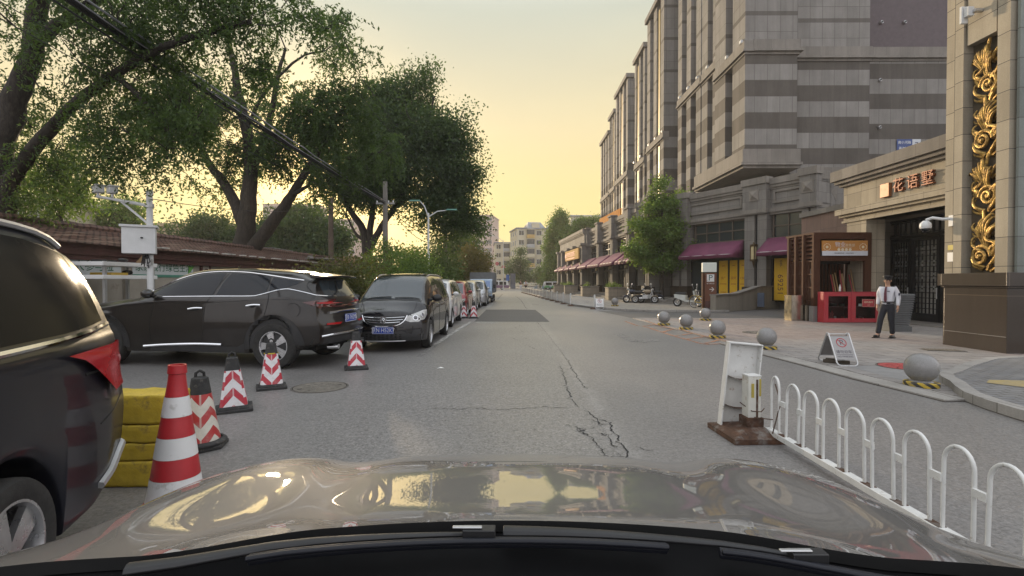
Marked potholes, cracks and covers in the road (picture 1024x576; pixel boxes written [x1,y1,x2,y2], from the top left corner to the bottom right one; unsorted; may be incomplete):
manhole cover [290,381,349,393]
manhole cover [875,362,904,370]
crack [413,325,643,458]
